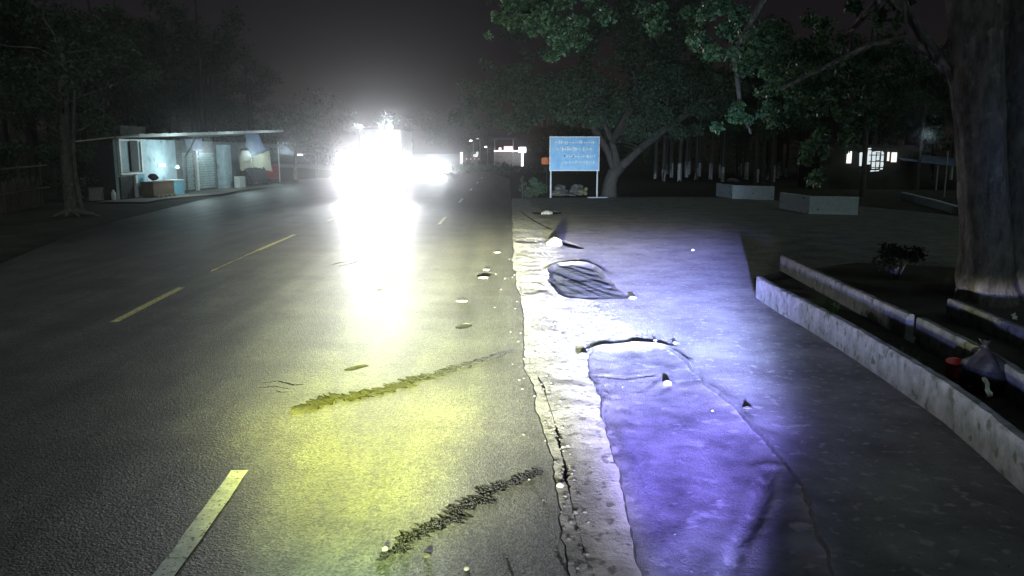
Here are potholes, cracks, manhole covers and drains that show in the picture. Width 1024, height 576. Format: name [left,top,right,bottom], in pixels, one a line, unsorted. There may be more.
pothole [547,261,629,300]
crack [260,350,515,410]
crack [376,376,587,562]
